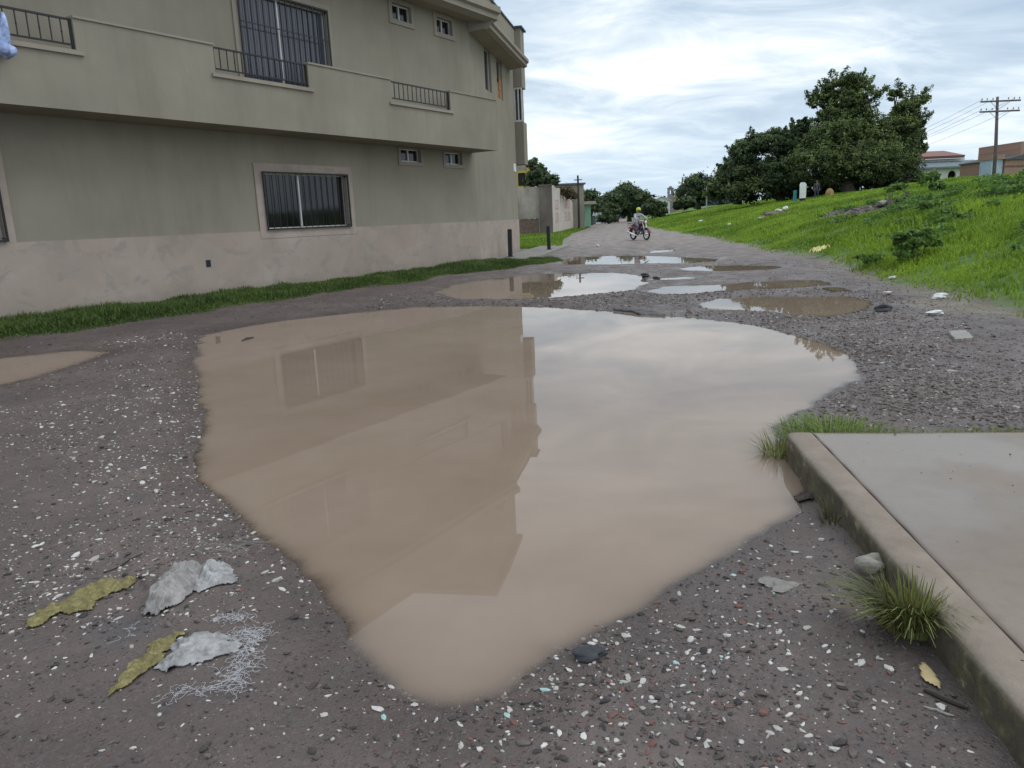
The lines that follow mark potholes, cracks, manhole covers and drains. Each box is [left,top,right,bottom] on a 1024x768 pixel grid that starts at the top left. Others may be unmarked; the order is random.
pothole [557,254,722,265]
pothole [0,347,120,386]
pothole [428,271,652,299]
pothole [642,278,837,294]
pothole [165,303,880,742]
pothole [690,293,882,317]
